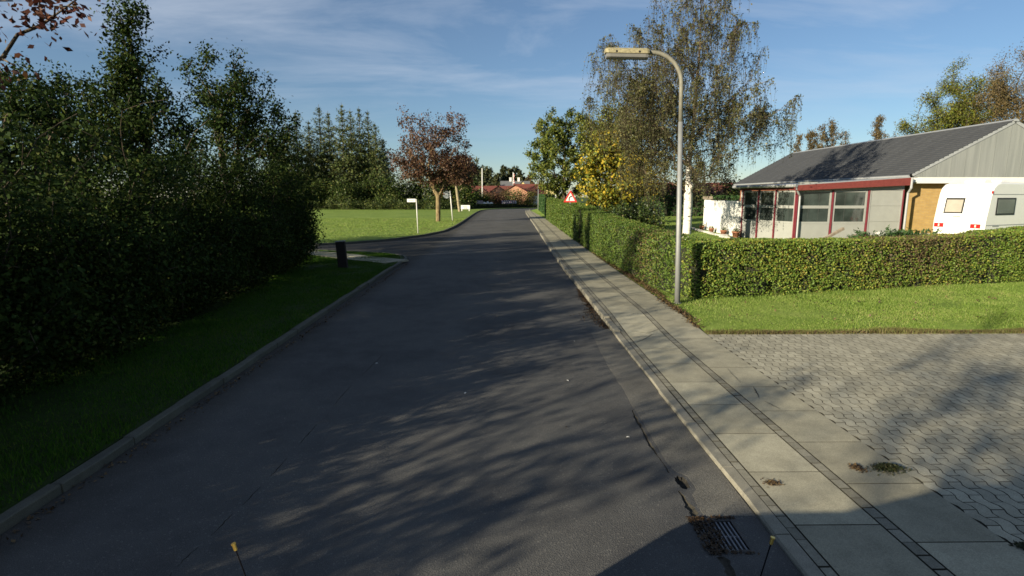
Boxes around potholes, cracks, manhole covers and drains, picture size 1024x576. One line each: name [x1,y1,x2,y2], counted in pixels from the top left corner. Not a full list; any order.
drain grate [693,519,755,552]
crack [678,491,698,517]
pothole [674,476,690,490]
